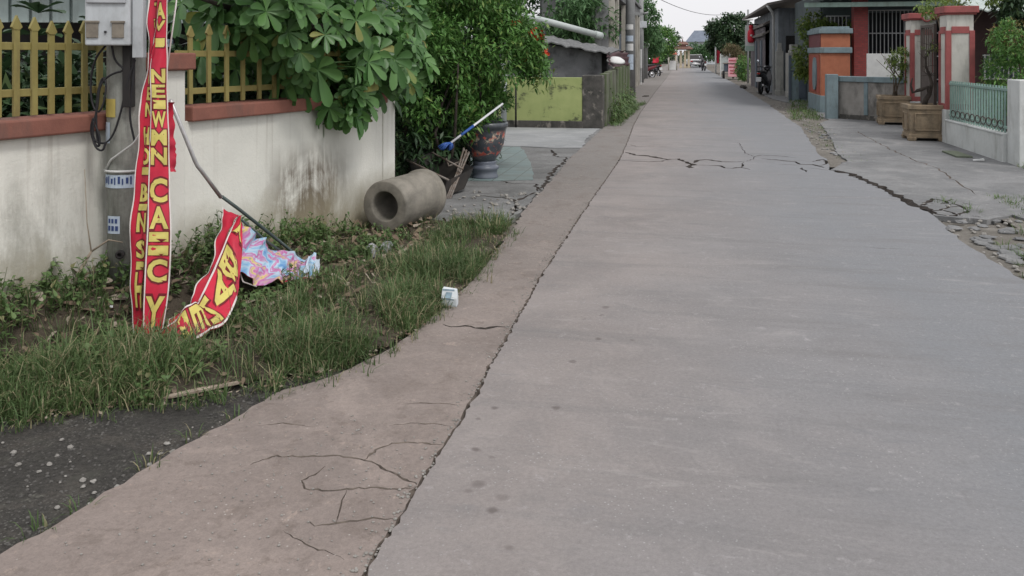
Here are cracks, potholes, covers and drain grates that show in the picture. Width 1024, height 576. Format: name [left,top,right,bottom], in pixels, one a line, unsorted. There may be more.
crack [480,150,568,216]
crack [618,131,976,216]
crack [252,423,446,559]
